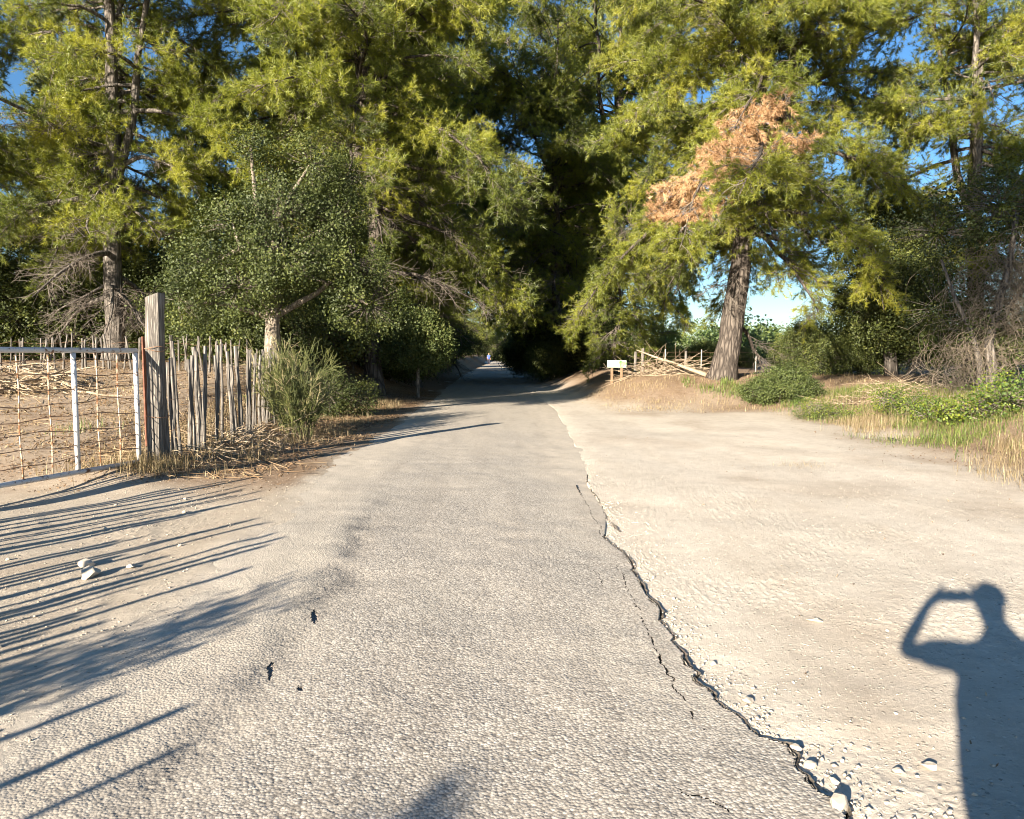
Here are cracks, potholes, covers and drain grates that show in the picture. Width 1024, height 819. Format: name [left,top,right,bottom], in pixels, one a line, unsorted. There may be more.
crack [576,474,852,819]
